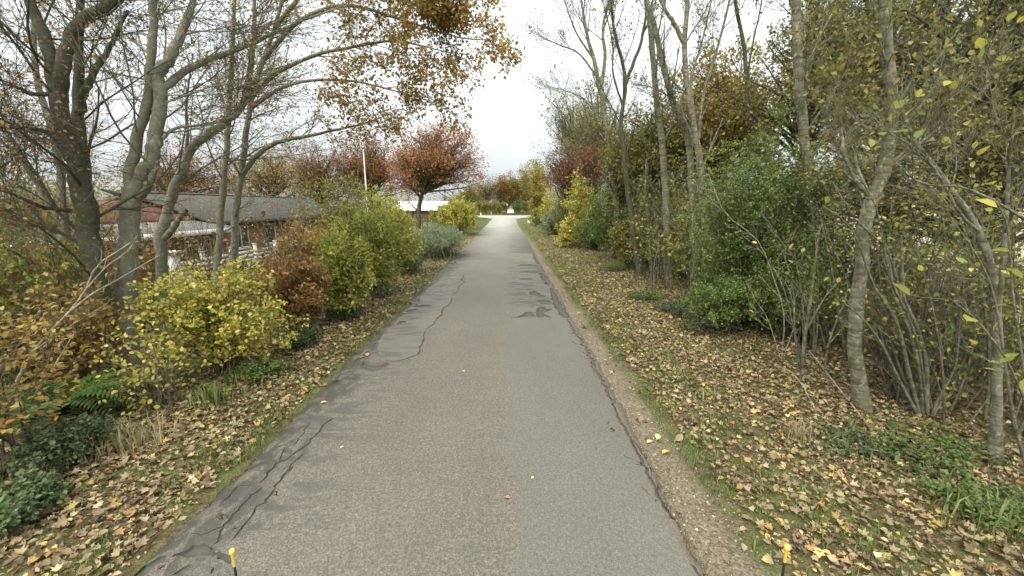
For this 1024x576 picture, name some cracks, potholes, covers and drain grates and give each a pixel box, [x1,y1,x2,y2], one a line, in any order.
crack [567,319,701,576]
crack [385,276,465,362]
crack [193,418,333,549]
